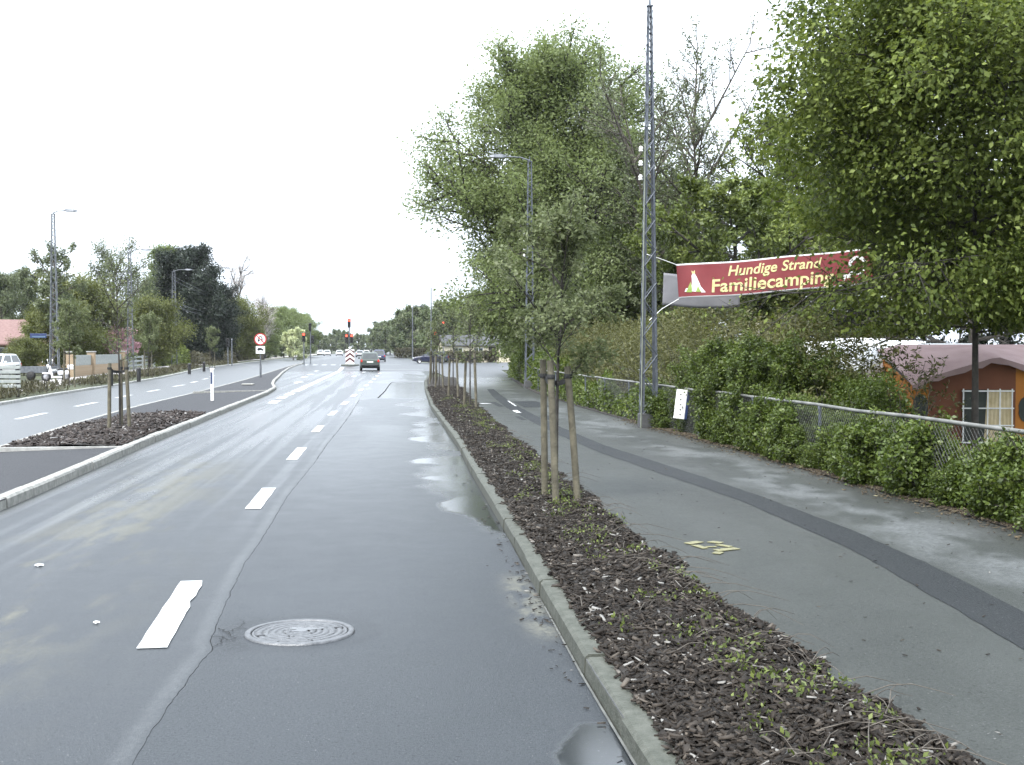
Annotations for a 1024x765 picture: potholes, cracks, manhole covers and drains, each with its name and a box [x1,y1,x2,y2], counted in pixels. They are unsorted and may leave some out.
manhole cover [244,619,355,646]
